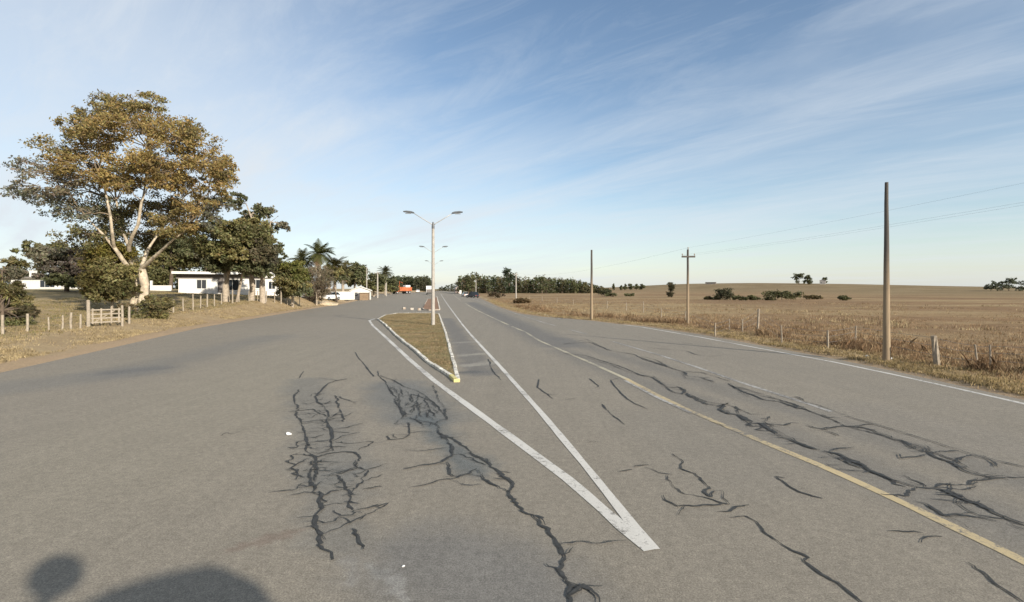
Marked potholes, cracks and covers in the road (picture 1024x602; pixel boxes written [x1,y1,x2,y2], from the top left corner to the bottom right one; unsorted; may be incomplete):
crack [355,352,618,602]
crack [968,562,1024,602]
crack [537,339,1024,542]
crack [622,454,862,602]
